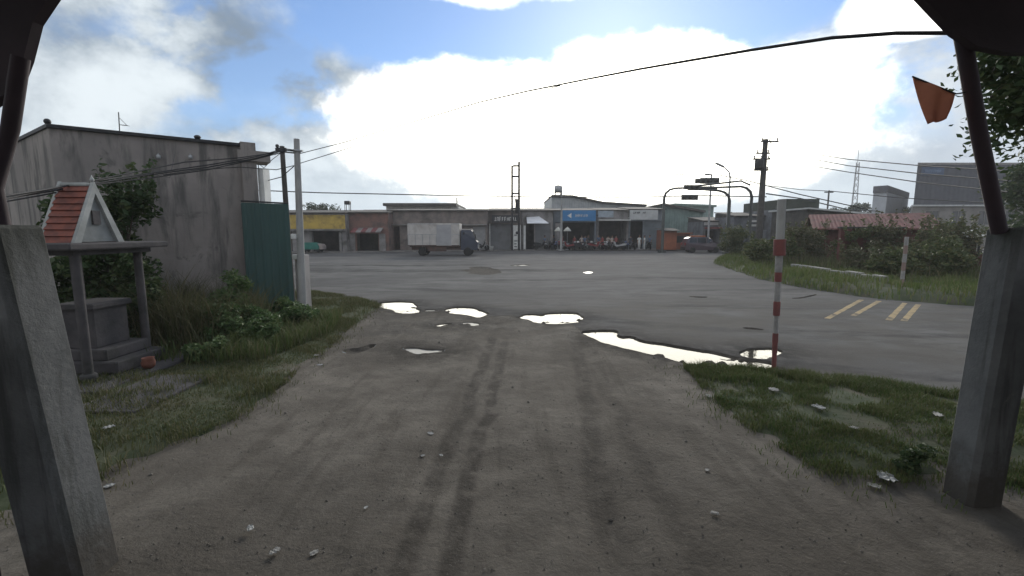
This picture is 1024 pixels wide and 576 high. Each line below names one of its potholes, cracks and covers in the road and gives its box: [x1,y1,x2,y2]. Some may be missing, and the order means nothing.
pothole [461,267,501,275]
pothole [379,301,420,314]
pothole [342,344,376,354]
pothole [581,330,777,368]
pothole [519,312,584,324]
pothole [444,307,489,318]
